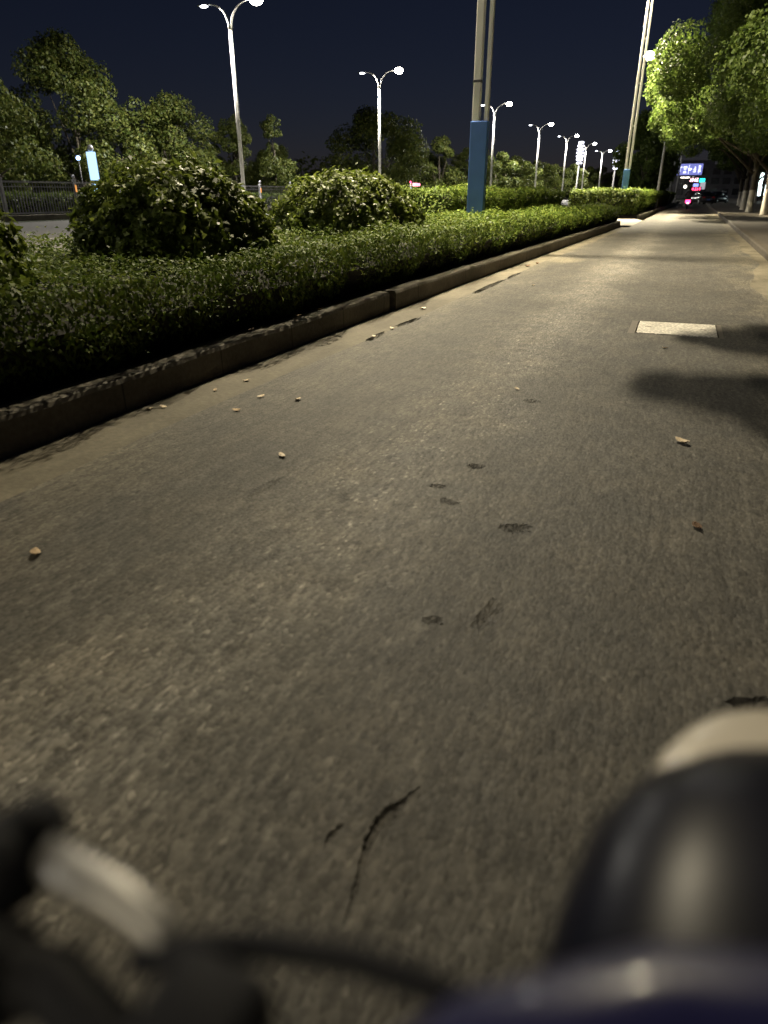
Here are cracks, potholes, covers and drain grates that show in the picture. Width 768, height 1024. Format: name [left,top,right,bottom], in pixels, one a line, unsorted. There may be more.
pothole [421,616,444,625]
crack [324,786,421,926]
manhole cover [627,320,724,339]
pothole [498,524,533,534]
pothole [439,497,461,506]
